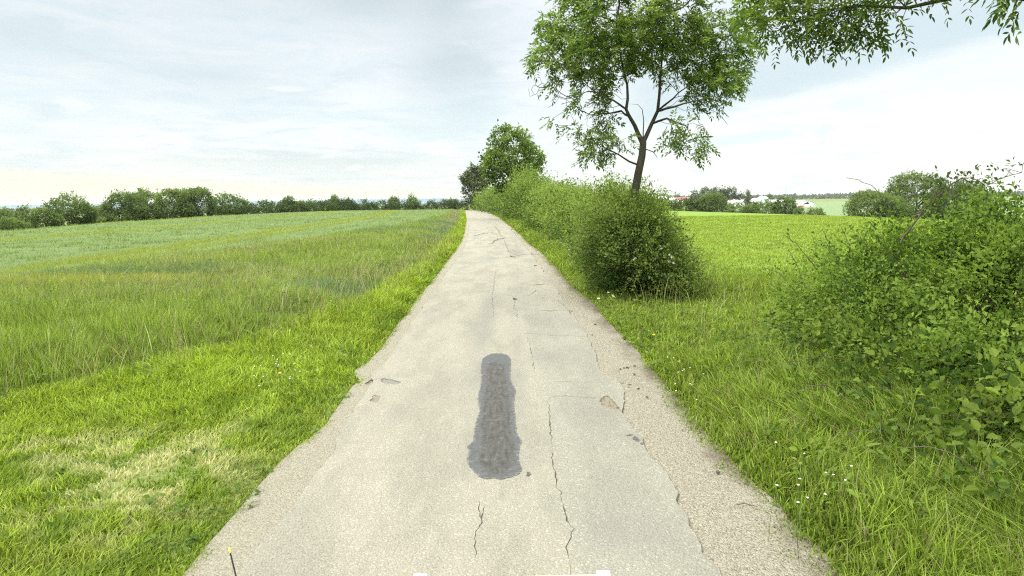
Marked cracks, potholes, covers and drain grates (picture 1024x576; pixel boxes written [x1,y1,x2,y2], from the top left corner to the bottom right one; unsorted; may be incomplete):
crack [474,225,527,255]
crack [491,272,595,572]
pothole [599,395,620,410]
crack [474,501,485,557]
